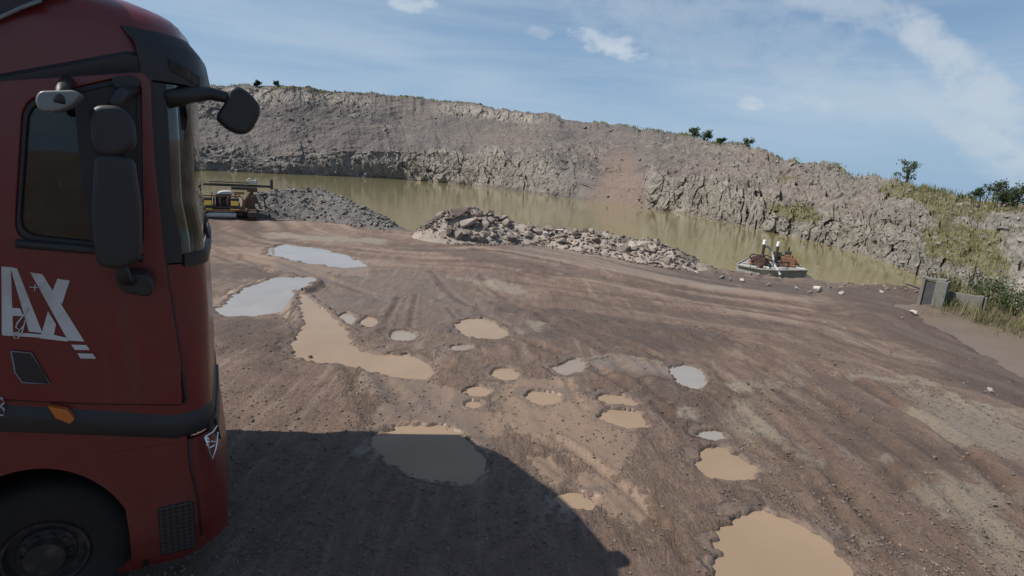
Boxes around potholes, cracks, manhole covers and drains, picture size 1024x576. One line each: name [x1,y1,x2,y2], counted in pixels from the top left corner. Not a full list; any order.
pothole [545,356,593,377]
pothole [362,420,496,487]
pothole [591,390,643,412]
pothole [458,382,499,402]
pothole [520,386,568,408]
pothole [485,364,526,382]
pothole [592,404,656,432]
pothole [686,442,769,488]
pothole [664,362,713,391]
pothole [449,316,516,340]
pothole [543,484,608,515]
pothole [285,290,442,380]
